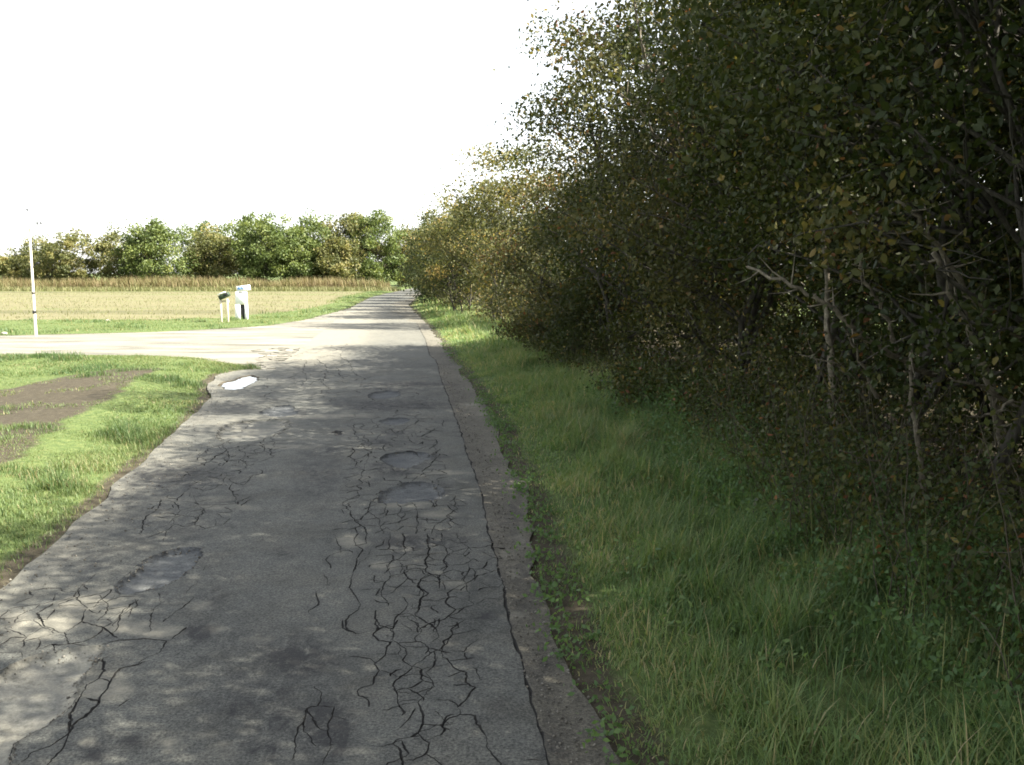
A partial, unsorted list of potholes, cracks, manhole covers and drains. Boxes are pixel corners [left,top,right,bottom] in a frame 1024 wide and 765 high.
crack [292,686,346,765]
pothole [113,547,204,594]
crack [308,379,504,765]
crack [250,344,370,403]
crack [137,423,308,541]
pothole [380,451,434,469]
pothole [367,390,401,399]
pothole [377,481,445,504]
pothole [379,417,410,425]
pothole [218,375,260,390]
crack [0,567,205,765]
